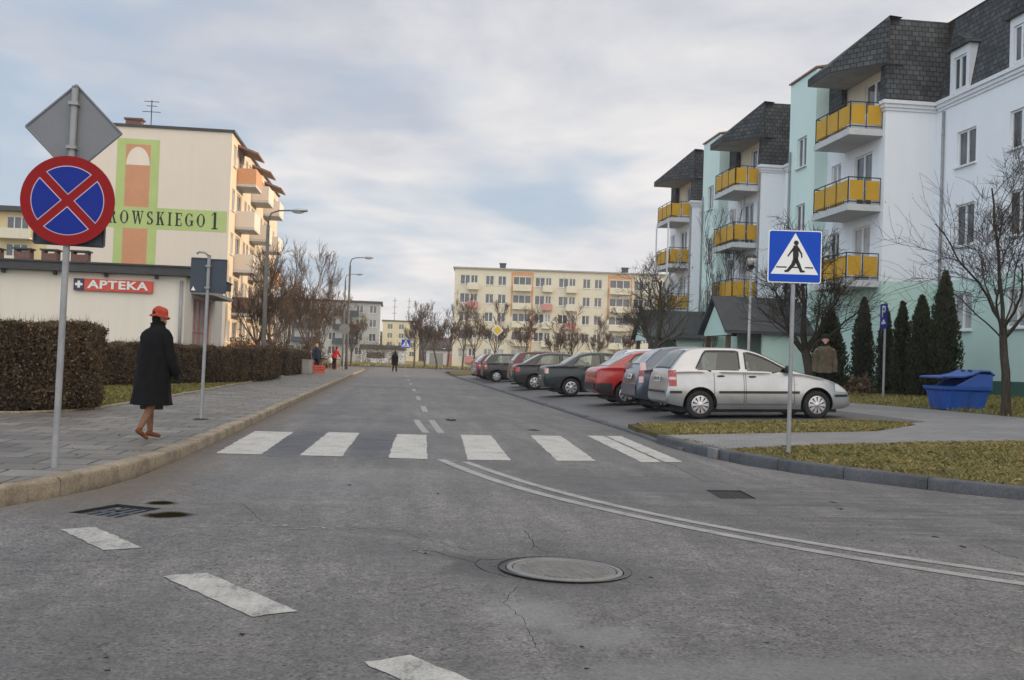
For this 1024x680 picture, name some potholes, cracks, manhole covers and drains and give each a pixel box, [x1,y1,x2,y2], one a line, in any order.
manhole cover [498,556,632,584]
drain grate [69,504,162,518]
crack [348,525,540,653]
drain grate [706,490,756,499]
